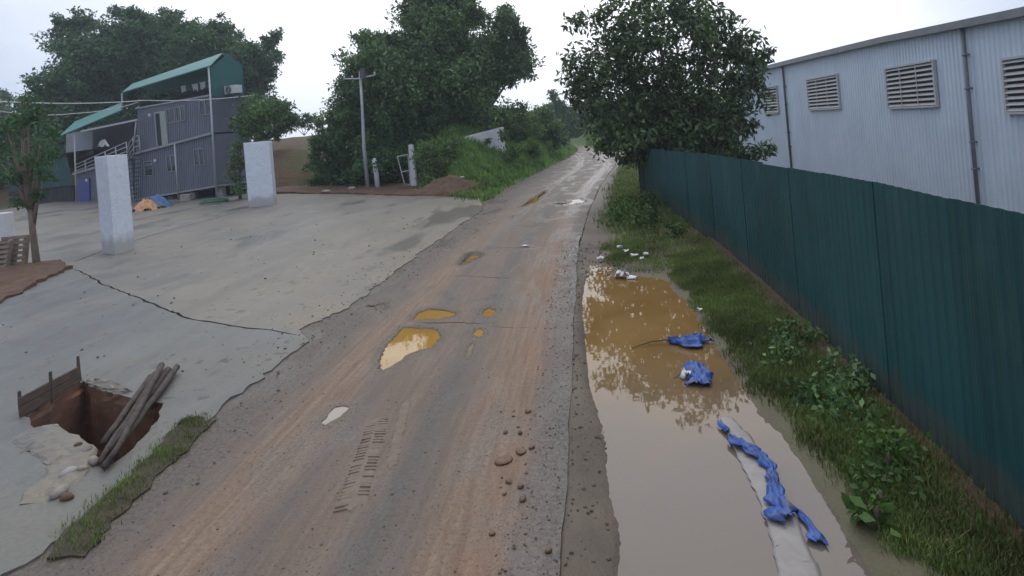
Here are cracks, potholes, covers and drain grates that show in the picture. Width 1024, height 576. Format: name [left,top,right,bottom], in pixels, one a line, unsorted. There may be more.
pothole [412,308,456,320]
pothole [461,253,481,264]
crack [74,210,295,335]
pothole [377,326,441,371]
